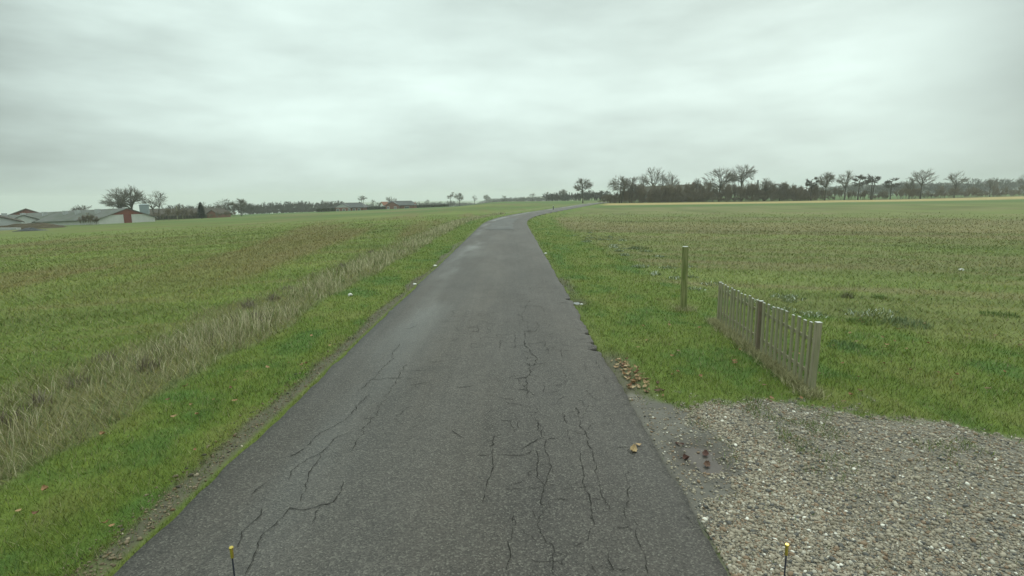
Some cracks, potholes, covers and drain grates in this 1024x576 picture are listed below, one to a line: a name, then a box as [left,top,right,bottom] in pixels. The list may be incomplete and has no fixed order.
crack [237,287,732,576]
